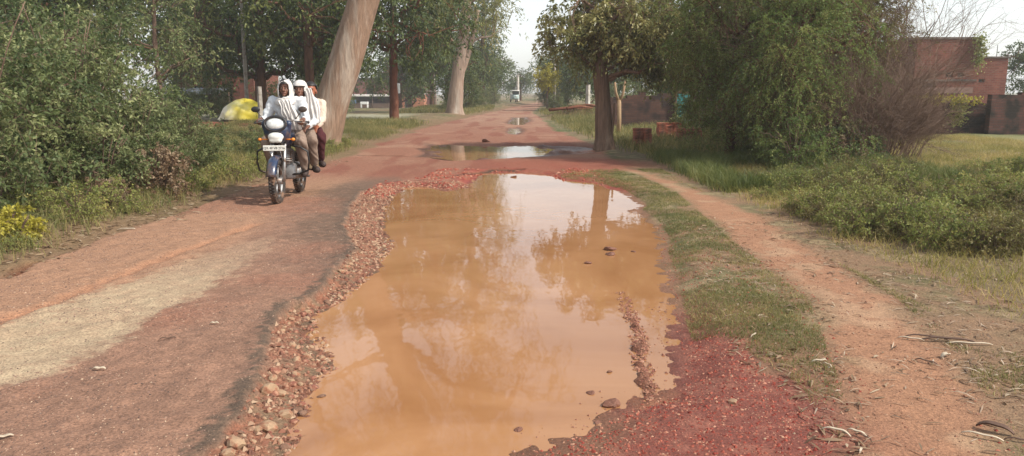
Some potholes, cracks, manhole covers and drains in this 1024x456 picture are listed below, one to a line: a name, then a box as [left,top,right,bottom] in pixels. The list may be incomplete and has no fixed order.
pothole [506,127,524,135]
pothole [505,117,532,125]
pothole [410,143,603,161]
pothole [234,168,737,456]
